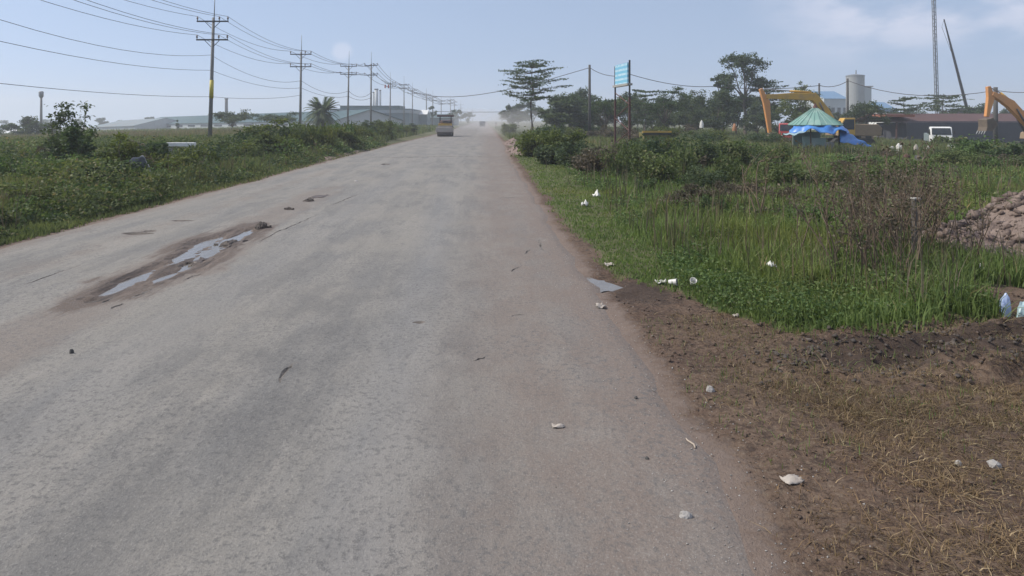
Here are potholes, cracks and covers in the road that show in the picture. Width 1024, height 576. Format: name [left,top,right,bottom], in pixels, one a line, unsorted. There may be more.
pothole [75,224,265,303]
